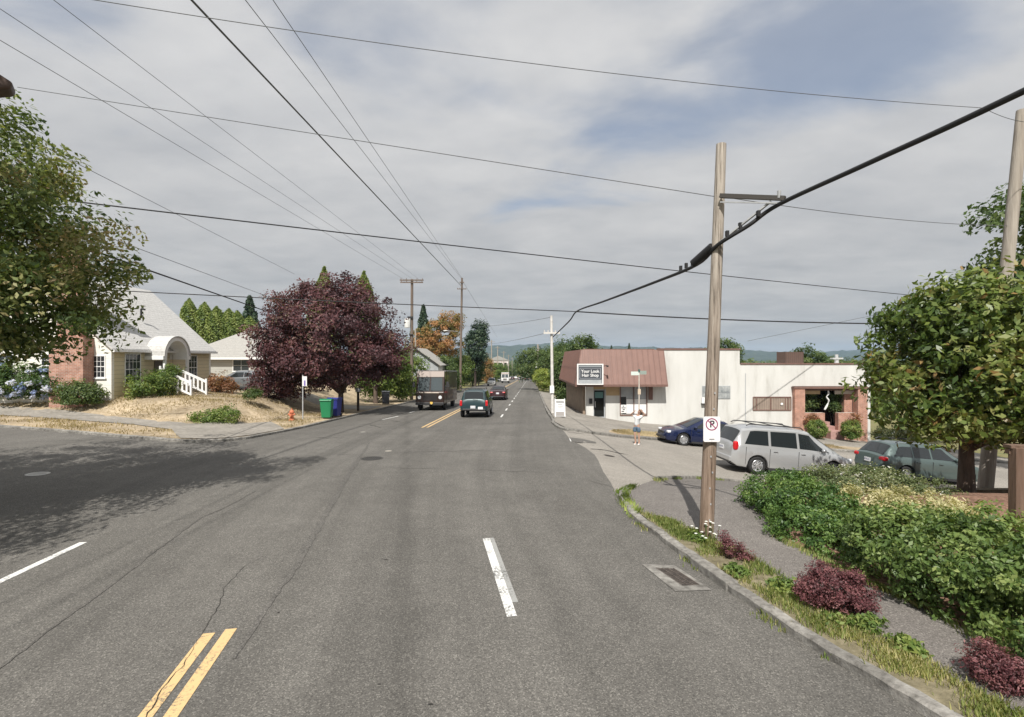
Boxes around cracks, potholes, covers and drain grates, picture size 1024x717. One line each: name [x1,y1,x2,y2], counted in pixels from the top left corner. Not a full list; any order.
drain grate [642,564,711,591]
